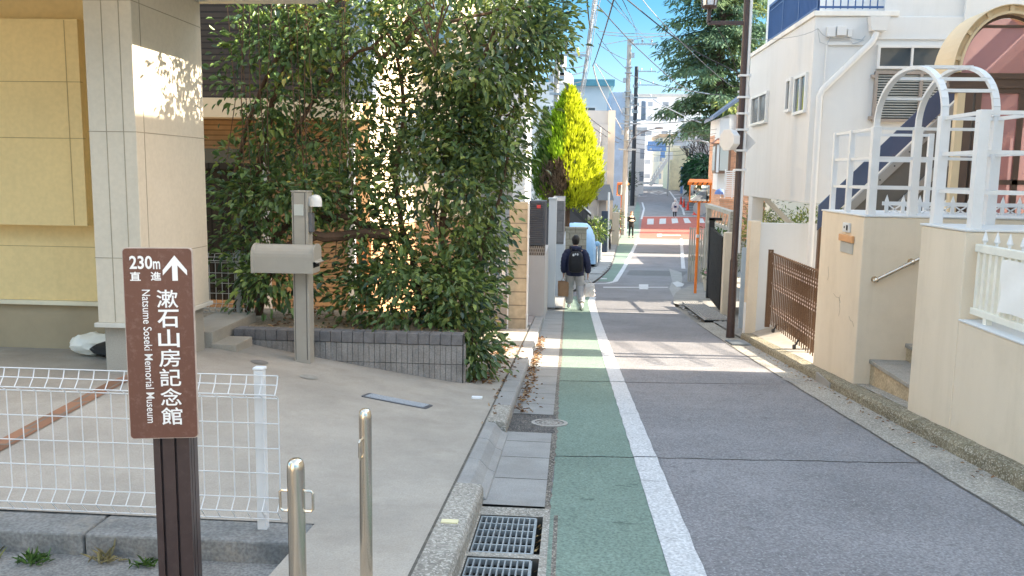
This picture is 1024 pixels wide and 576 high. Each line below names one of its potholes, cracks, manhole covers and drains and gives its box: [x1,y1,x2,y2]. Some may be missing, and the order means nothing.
drain grate [468,515,543,559]
drain grate [460,556,539,576]
manhole cover [531,419,568,427]
utility cover [361,393,433,409]
